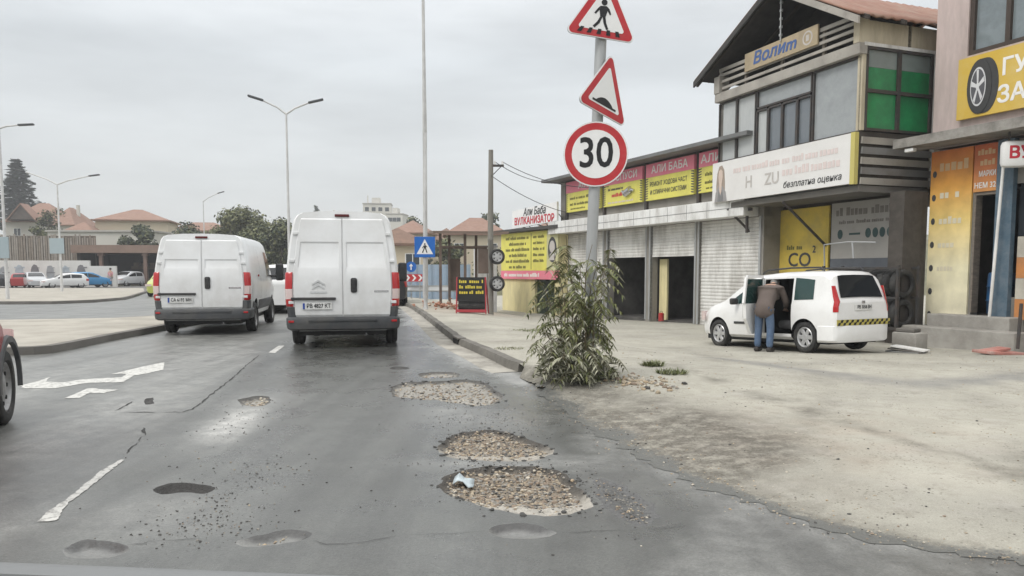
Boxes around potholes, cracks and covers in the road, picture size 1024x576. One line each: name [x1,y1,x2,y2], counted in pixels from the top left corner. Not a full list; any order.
pothole [63,539,129,559]
pothole [153,483,215,494]
pothole [489,523,556,539]
pothole [433,427,558,461]
crack [114,355,259,452]
pothole [430,464,601,517]
pothole [236,529,312,547]
pothole [388,379,507,406]
pothole [238,396,271,407]
